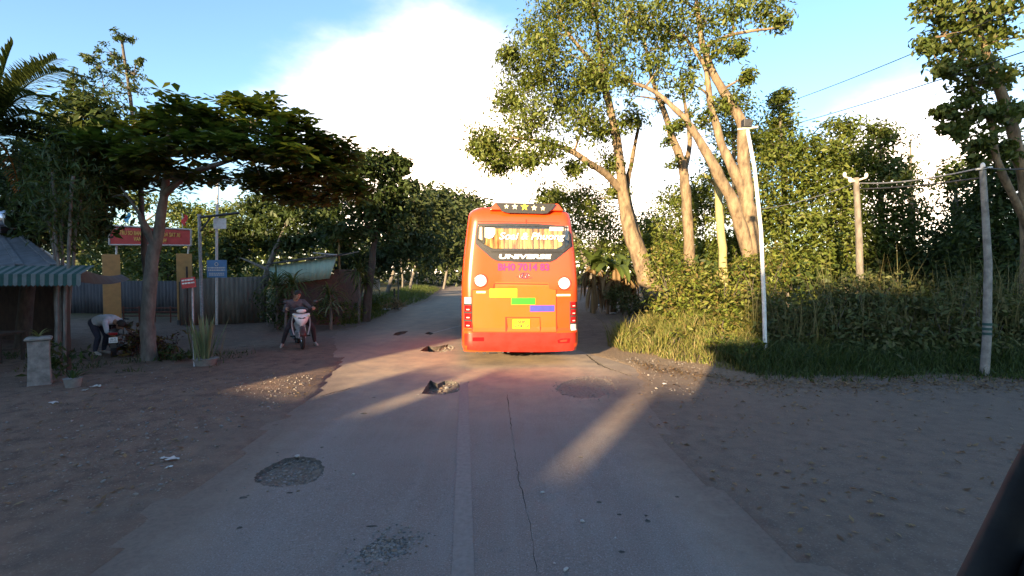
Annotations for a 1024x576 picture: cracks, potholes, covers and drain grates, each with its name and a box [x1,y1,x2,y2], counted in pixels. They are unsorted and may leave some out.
crack [507,395,537,570]
pothole [421,344,455,352]
pothole [226,455,336,492]
pothole [416,380,460,399]
pothole [335,523,435,576]
pothole [553,375,621,402]
